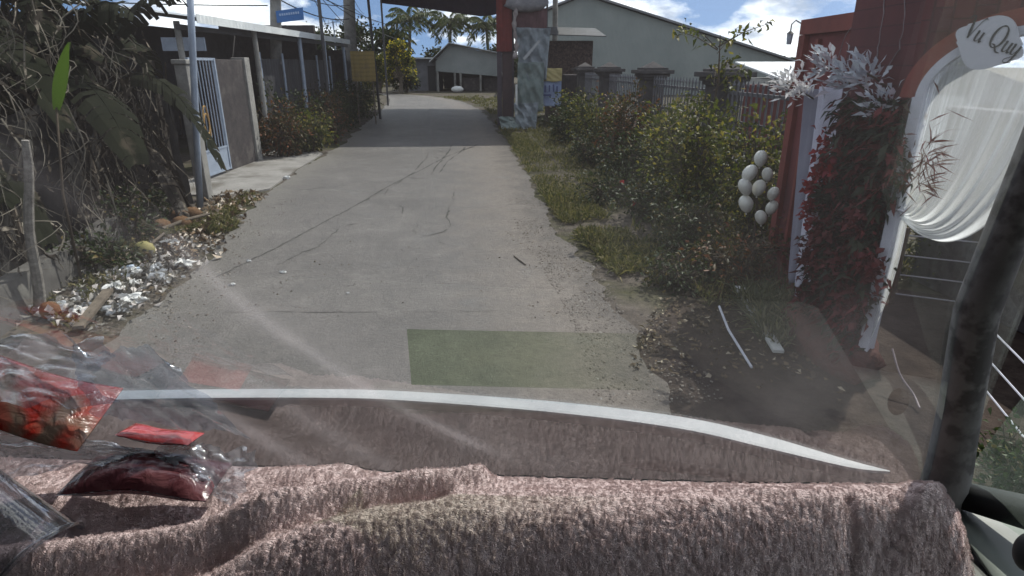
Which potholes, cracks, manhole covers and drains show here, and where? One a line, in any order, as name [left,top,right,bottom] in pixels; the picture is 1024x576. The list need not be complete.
crack [214,145,476,278]
